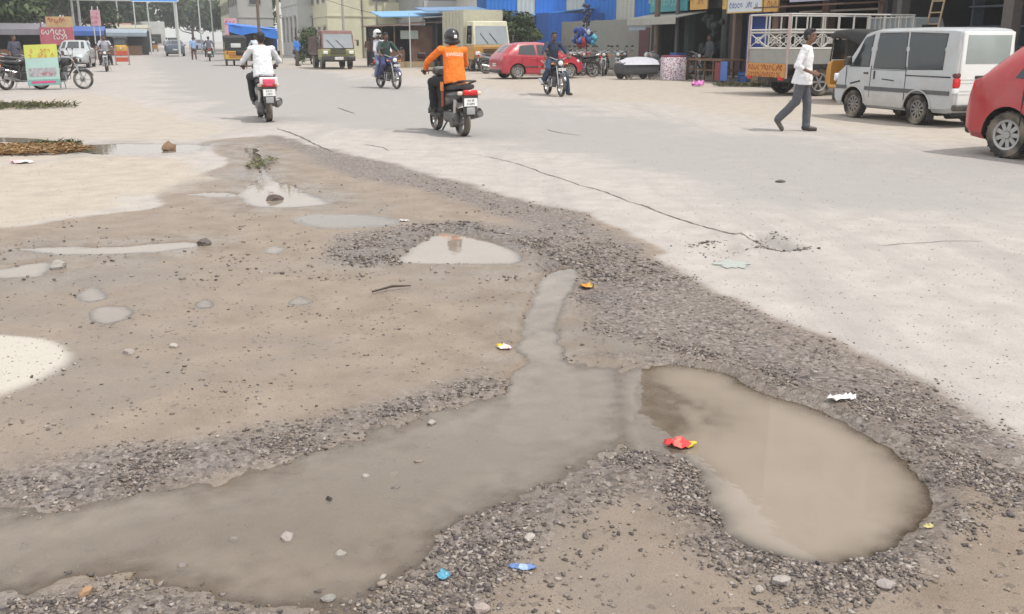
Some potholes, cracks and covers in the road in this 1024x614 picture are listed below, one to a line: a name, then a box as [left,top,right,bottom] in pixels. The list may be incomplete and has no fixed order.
pothole [608,352,980,580]
pothole [377,224,541,269]
pothole [0,258,57,279]
pothole [287,212,407,229]
pothole [227,144,340,208]
crack [474,154,752,240]
pothole [742,231,808,251]
pothole [80,302,140,325]
pothole [276,293,321,306]
pothole [185,294,223,309]
pothole [67,283,117,303]
